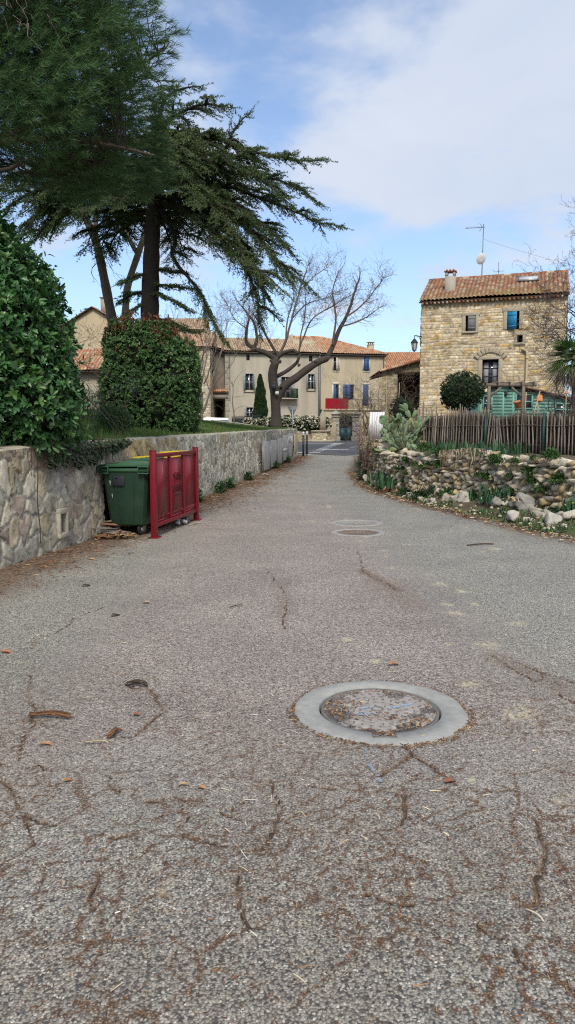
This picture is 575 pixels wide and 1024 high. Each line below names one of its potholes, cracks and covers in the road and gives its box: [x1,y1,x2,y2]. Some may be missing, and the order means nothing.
manhole cover [327,519,385,527]
crack [476,924,530,970]
manhole cover [285,679,477,749]
crack [365,894,413,907]
crack [109,776,282,871]
crack [0,674,57,851]
crack [379,748,447,777]
crack [485,788,548,908]
crack [88,874,101,912]
crack [268,571,287,629]
crack [235,875,264,930]
manhole cover [330,528,385,536]
